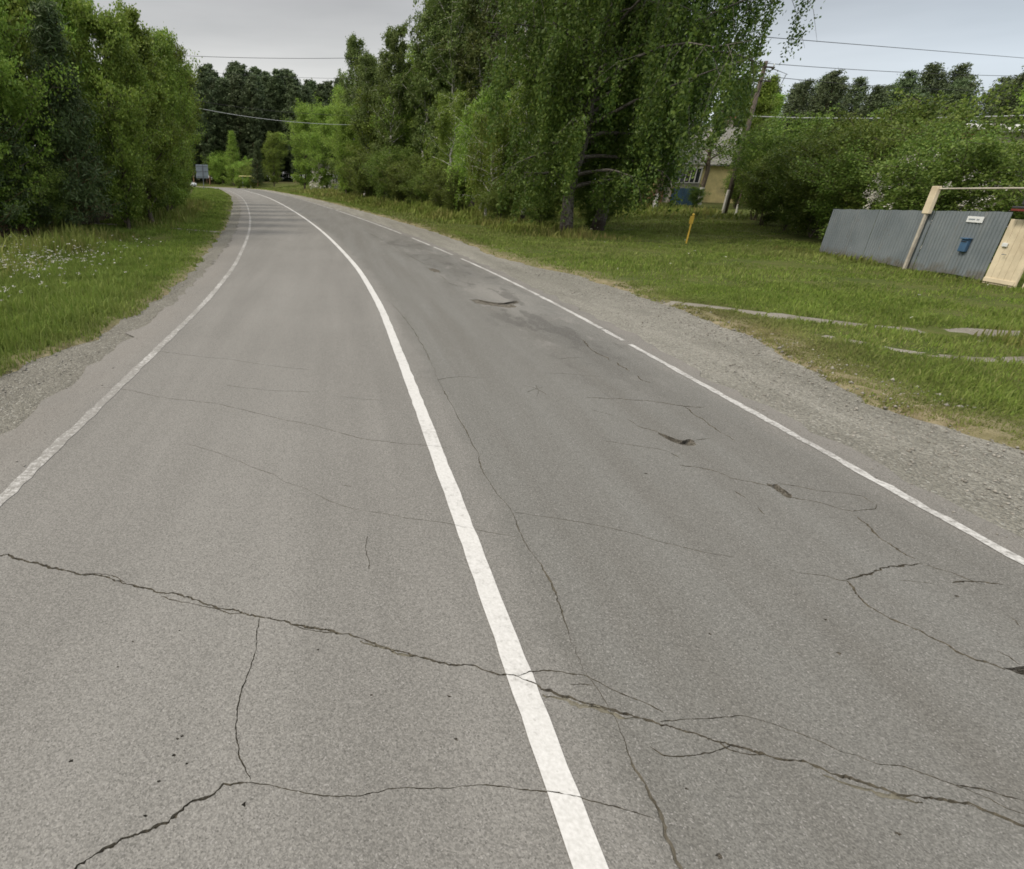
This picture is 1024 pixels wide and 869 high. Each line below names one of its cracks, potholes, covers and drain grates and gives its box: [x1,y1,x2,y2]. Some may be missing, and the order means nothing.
pothole [658,433,696,446]
crack [102,387,443,448]
pothole [472,299,519,308]
pothole [766,483,792,498]
crack [0,397,1024,869]
